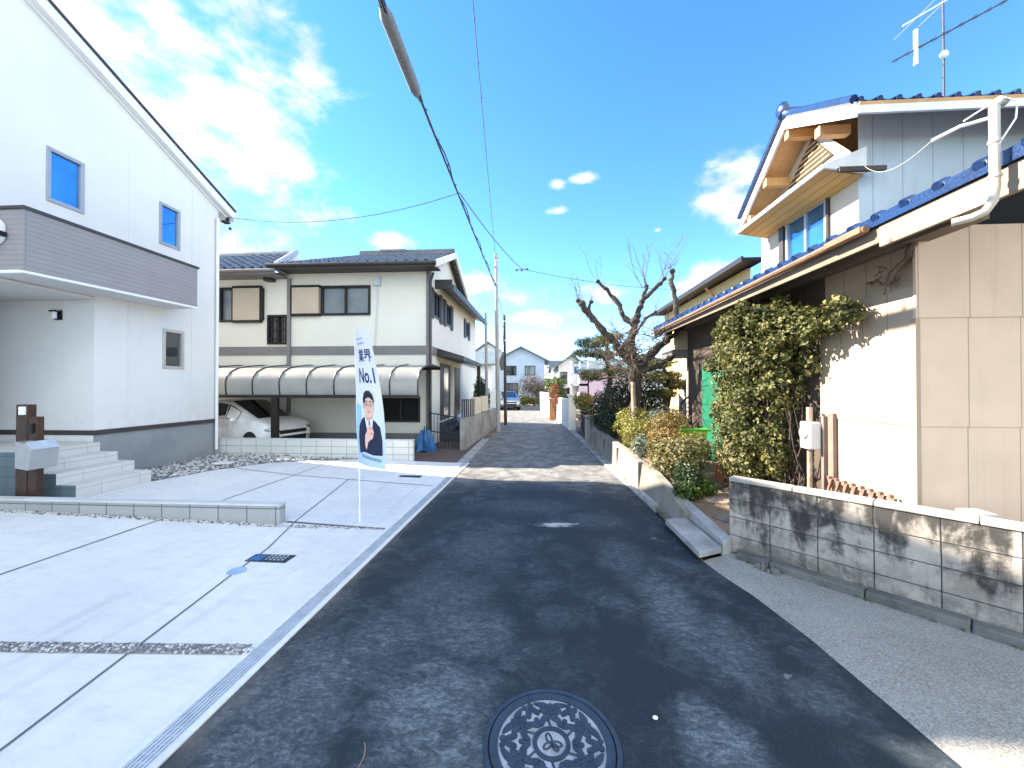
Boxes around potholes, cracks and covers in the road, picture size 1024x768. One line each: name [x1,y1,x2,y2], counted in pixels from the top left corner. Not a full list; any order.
manhole cover [483,689,623,768]
